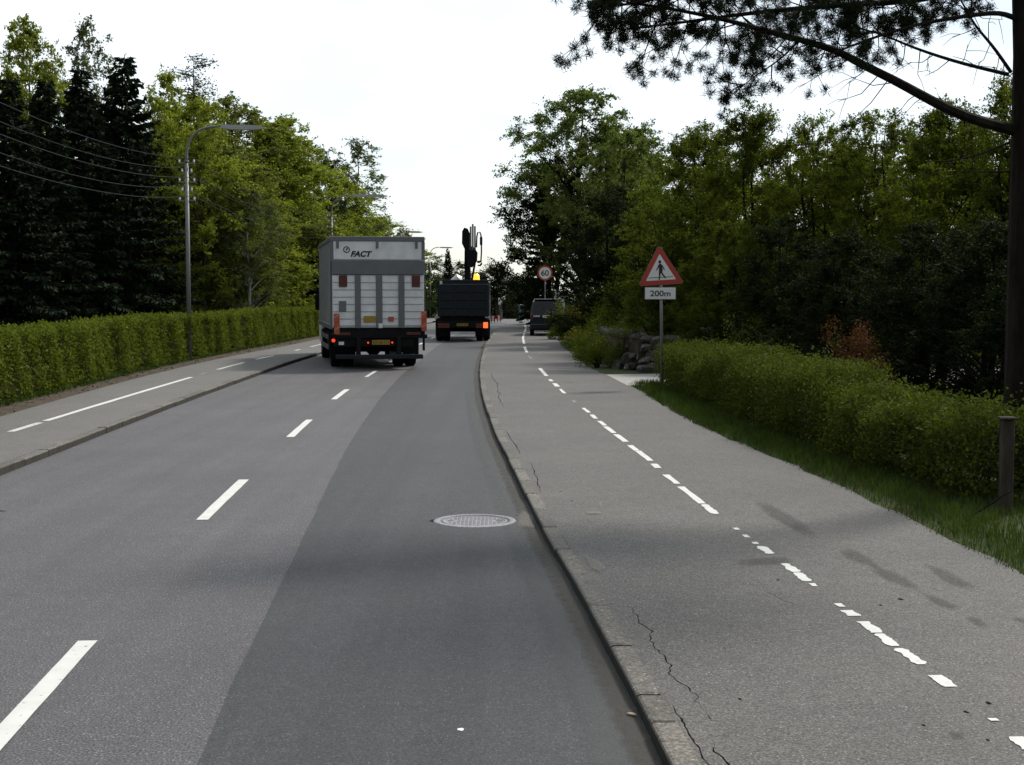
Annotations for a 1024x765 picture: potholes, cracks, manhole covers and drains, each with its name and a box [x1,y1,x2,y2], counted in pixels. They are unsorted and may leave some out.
manhole cover [434,514,516,528]
crack [629,607,711,719]
